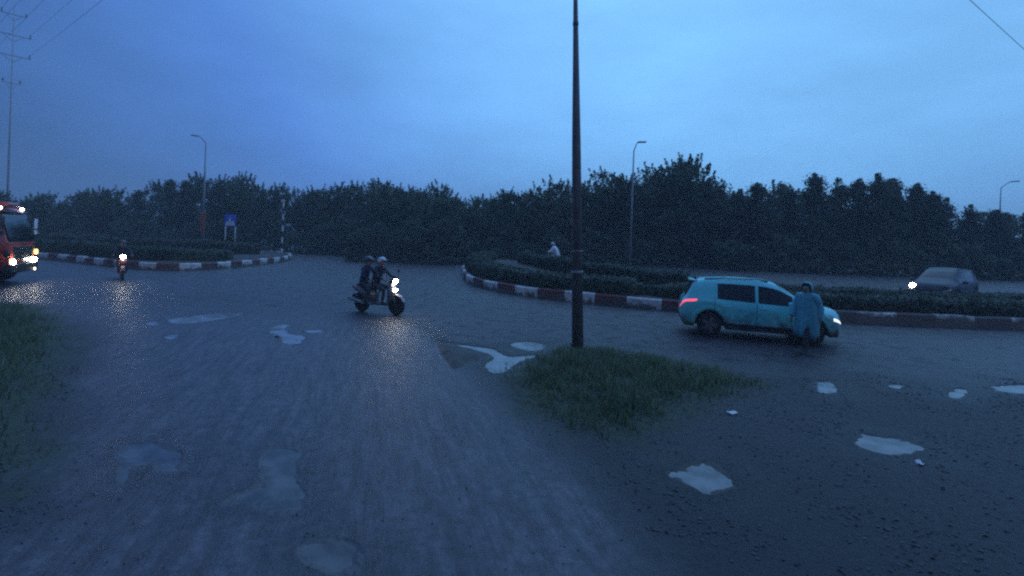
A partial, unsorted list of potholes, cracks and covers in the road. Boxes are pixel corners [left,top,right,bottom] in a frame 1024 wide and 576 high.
pothole [806,380,840,394]
pothole [508,341,548,351]
pothole [665,461,737,495]
pothole [852,433,926,456]
pothole [113,441,188,486]
pothole [296,536,365,576]
pothole [222,444,312,516]
pothole [981,383,1024,394]
pothole [269,324,305,345]
pothole [167,312,245,324]
pothole [431,338,539,373]
pothole [946,387,970,399]
